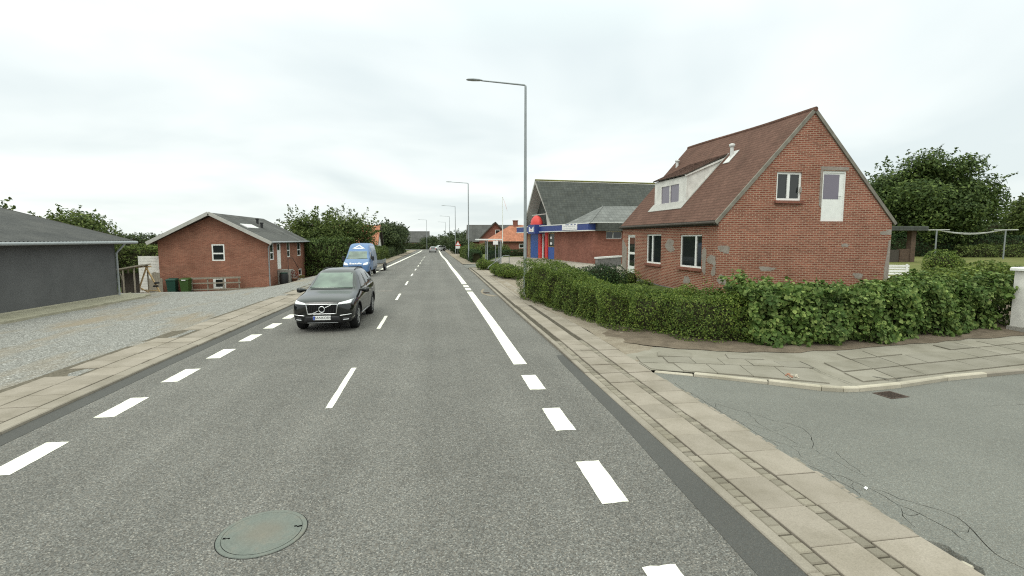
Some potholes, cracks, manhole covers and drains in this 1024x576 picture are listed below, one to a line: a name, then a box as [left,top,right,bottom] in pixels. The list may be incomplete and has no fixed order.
crack [806,452,1024,569]
drain grate [873,391,909,399]
crack [675,383,860,474]
manhole cover [214,510,308,559]
